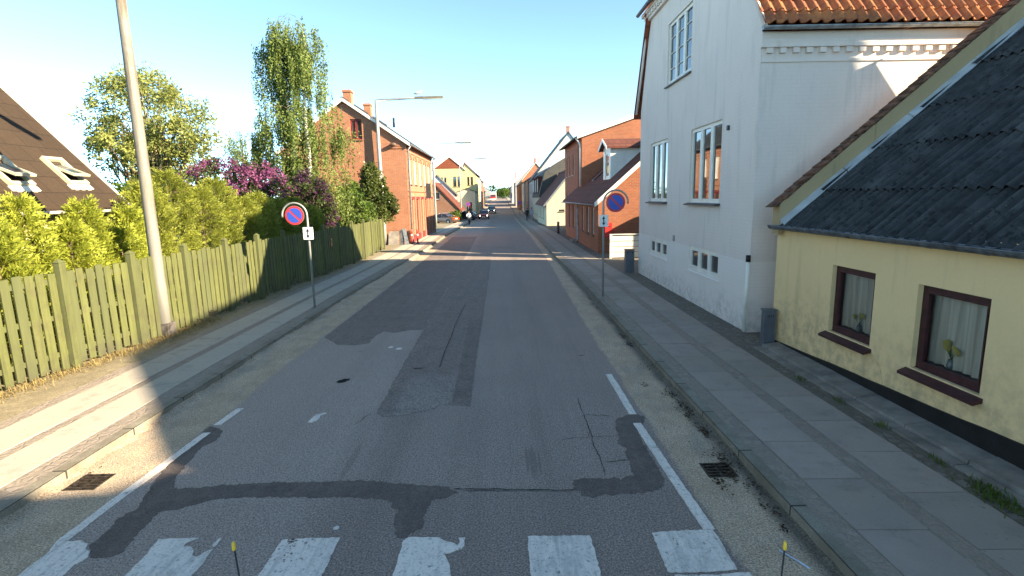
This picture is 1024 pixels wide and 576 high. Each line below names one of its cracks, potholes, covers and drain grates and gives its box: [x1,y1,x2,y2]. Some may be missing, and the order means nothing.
crack [562,399,627,473]
drain grate [62,473,116,491]
drain grate [699,462,739,478]
crack [414,305,465,369]
